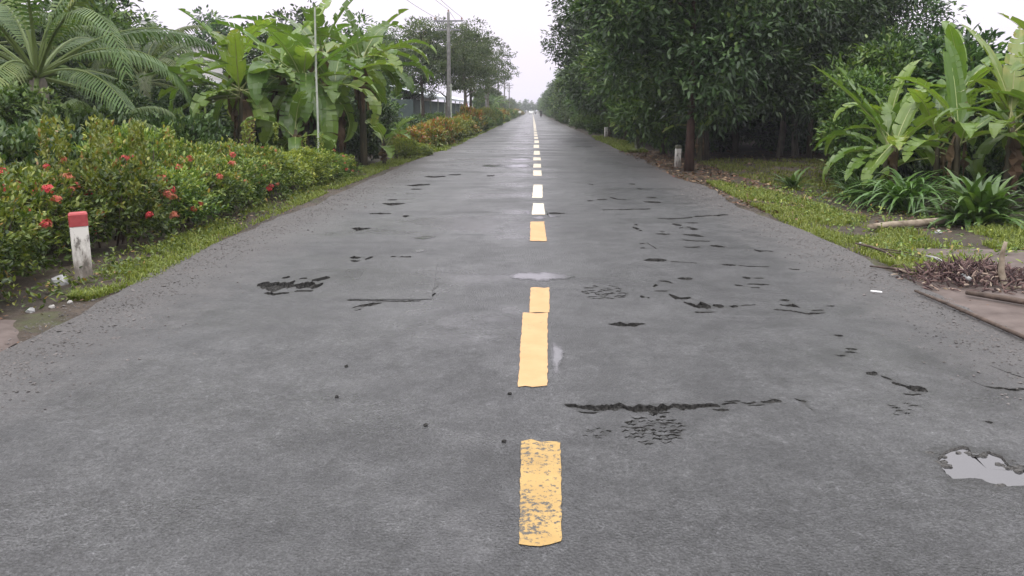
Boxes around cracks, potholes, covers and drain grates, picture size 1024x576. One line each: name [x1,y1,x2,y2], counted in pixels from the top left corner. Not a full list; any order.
crack [581,285,627,299]
crack [735,277,833,315]
pothole [257,280,323,293]
crack [564,398,812,445]
crack [969,366,1024,391]
pothole [925,446,1024,487]
crack [347,289,436,311]
